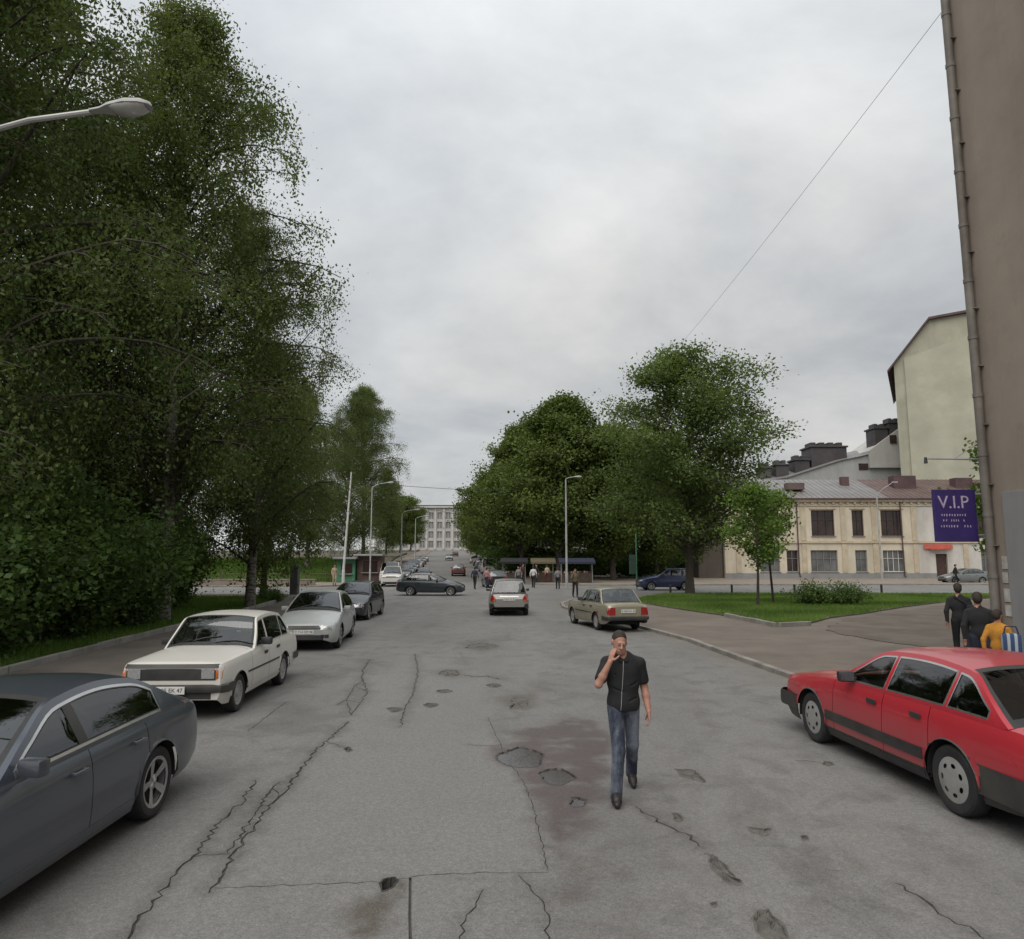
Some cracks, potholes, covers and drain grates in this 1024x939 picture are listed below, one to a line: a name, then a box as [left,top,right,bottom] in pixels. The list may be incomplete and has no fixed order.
pothole [704,853,743,886]
pothole [537,768,577,785]
pothole [509,696,529,710]
pothole [750,908,790,939]
crack [636,807,699,846]
pothole [495,746,545,768]
pothole [568,797,588,807]
pothole [379,876,399,892]
pothole [674,769,706,783]
crack [127,660,551,939]
crack [896,883,984,939]
